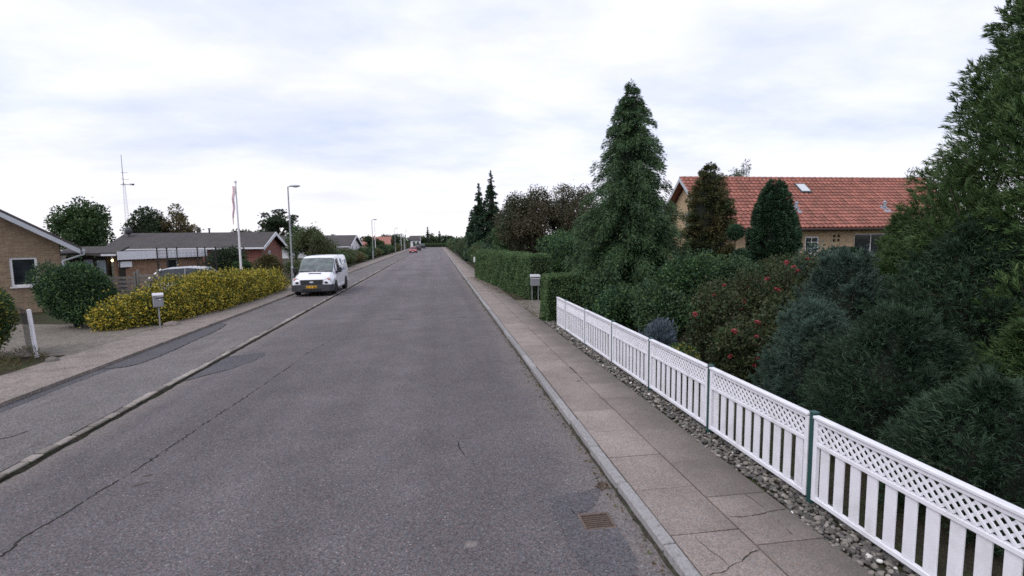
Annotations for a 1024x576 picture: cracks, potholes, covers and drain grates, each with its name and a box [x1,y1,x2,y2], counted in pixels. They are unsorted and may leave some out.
drain grate [578,512,617,530]
crack [1,337,336,556]
crack [695,536,759,576]
